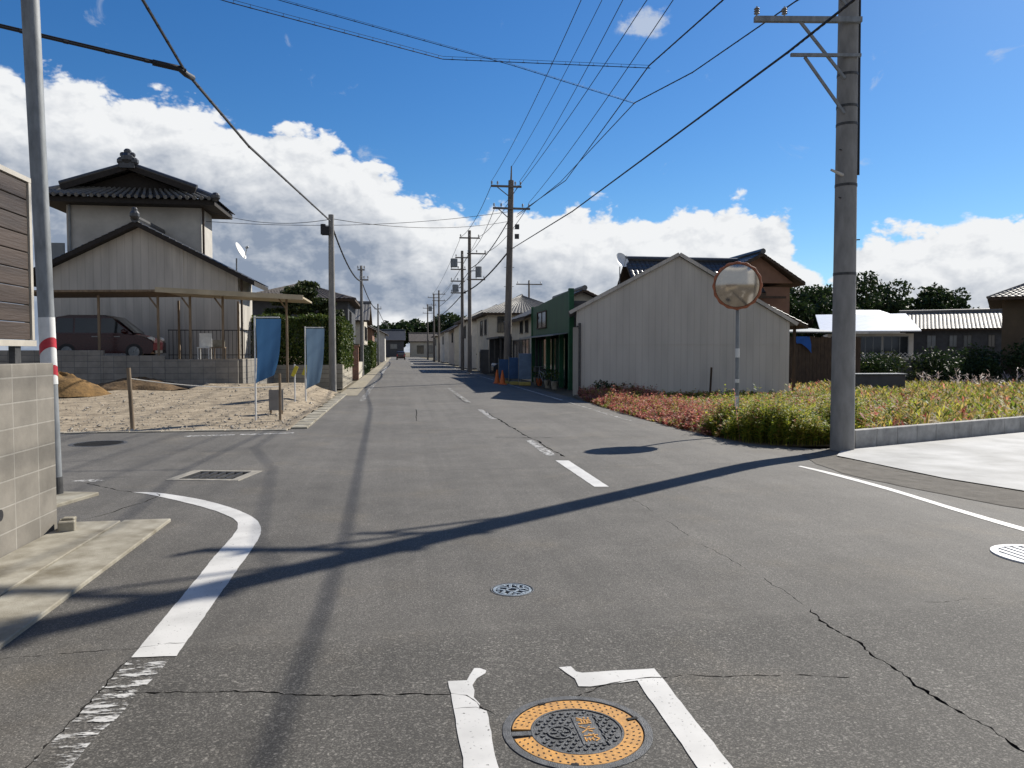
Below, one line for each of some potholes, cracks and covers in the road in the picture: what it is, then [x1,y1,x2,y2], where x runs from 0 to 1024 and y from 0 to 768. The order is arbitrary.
crack [486,412,565,457]
crack [810,609,1024,752]
crack [578,674,848,696]
manhole cover [990,544,1024,564]
drain grate [166,470,262,481]
manhole cover [490,583,534,597]
manhole cover [502,696,653,768]
